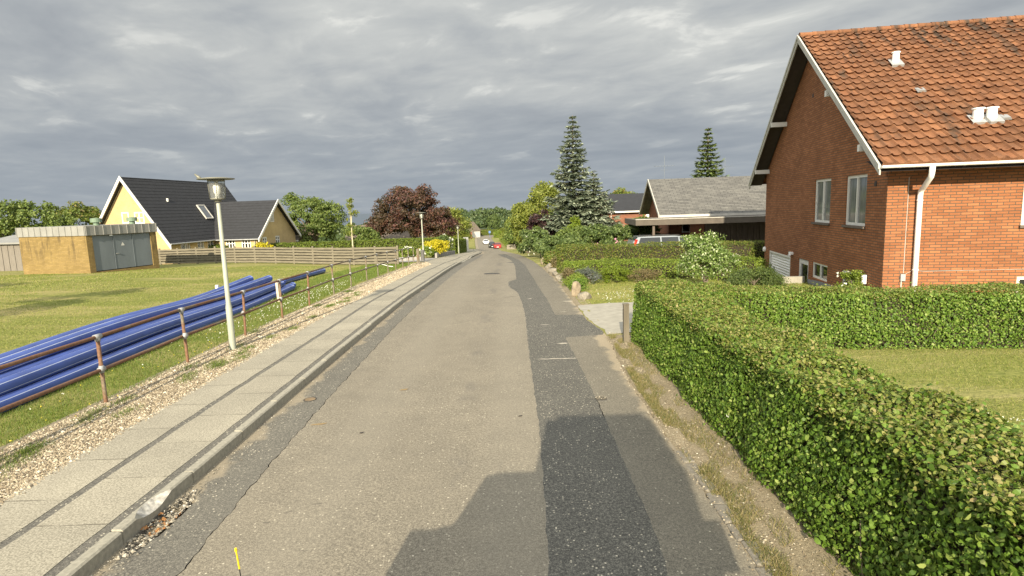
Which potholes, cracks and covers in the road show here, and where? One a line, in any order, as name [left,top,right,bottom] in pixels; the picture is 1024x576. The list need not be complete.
pothole [115,489,202,560]
